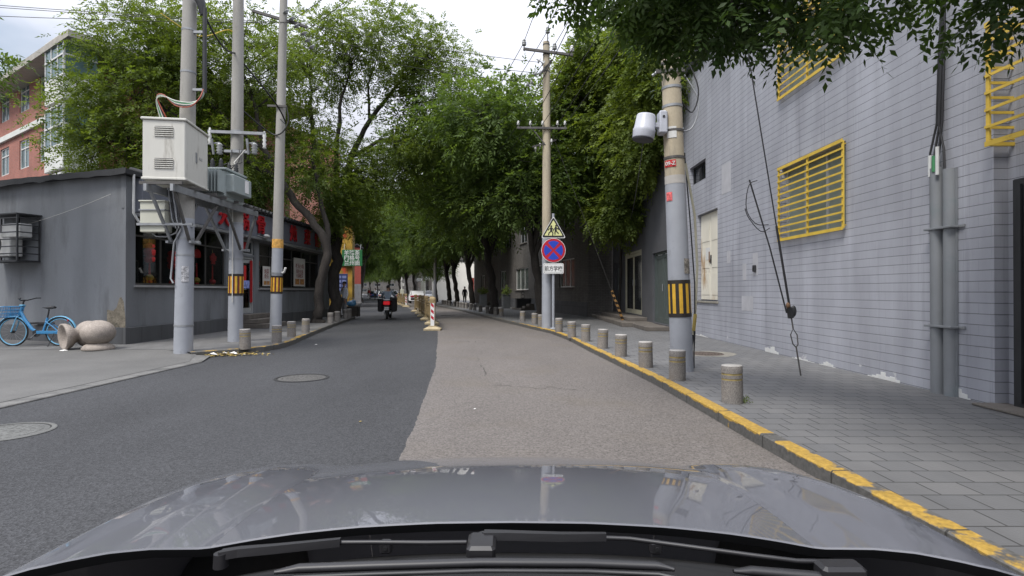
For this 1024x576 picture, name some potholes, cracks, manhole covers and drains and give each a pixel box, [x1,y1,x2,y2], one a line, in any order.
manhole cover [0,422,58,441]
manhole cover [273,374,330,382]
